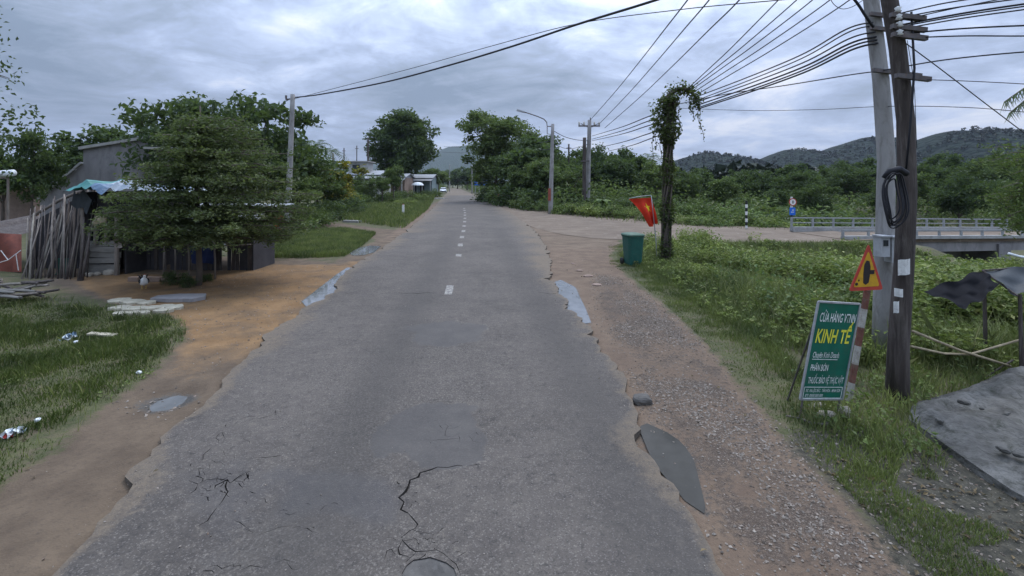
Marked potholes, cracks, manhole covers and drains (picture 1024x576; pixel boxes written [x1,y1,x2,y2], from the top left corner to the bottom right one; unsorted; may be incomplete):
crack [384,464,478,572]
crack [190,411,329,534]
pothole [402,557,456,576]
